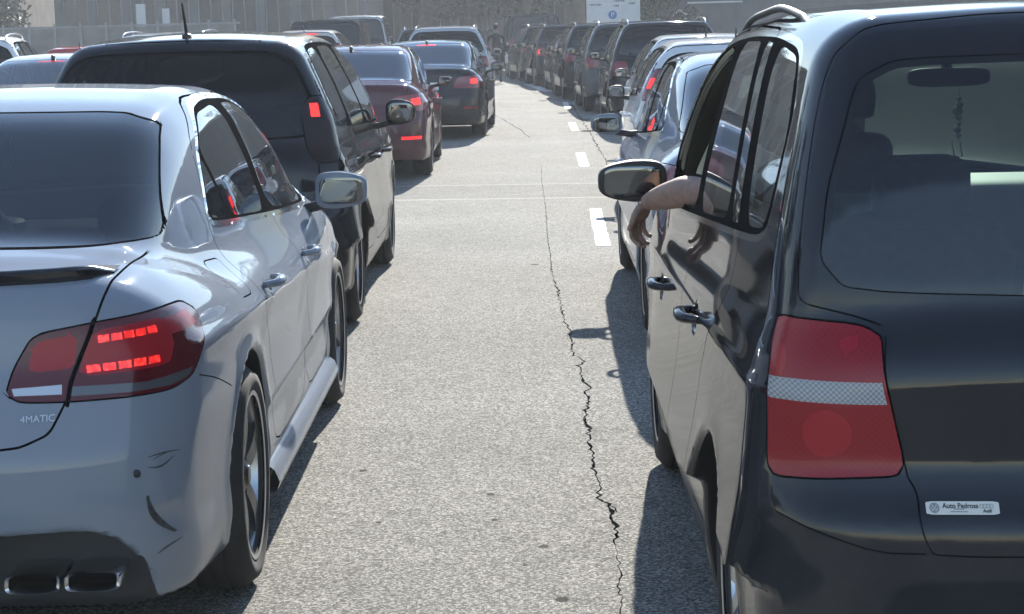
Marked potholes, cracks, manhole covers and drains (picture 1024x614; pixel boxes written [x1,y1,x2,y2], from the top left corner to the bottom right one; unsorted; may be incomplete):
crack [541,169,629,614]
